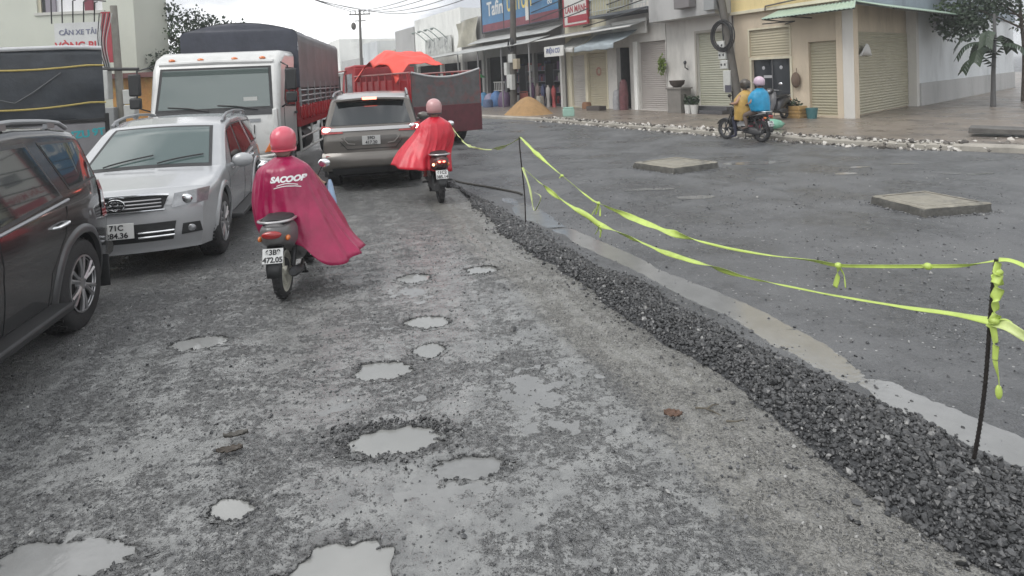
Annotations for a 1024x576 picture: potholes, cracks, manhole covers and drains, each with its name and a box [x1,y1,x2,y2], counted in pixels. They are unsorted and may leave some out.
pothole [418,451,521,486]
pothole [342,358,425,384]
pothole [390,272,437,286]
manhole cover [865,191,1004,221]
pothole [156,333,242,355]
pothole [304,411,493,471]
pothole [395,314,458,331]
pothole [0,530,168,576]
pothole [461,264,506,276]
manhole cover [625,157,729,175]
pothole [406,341,452,362]
pothole [248,522,419,576]
